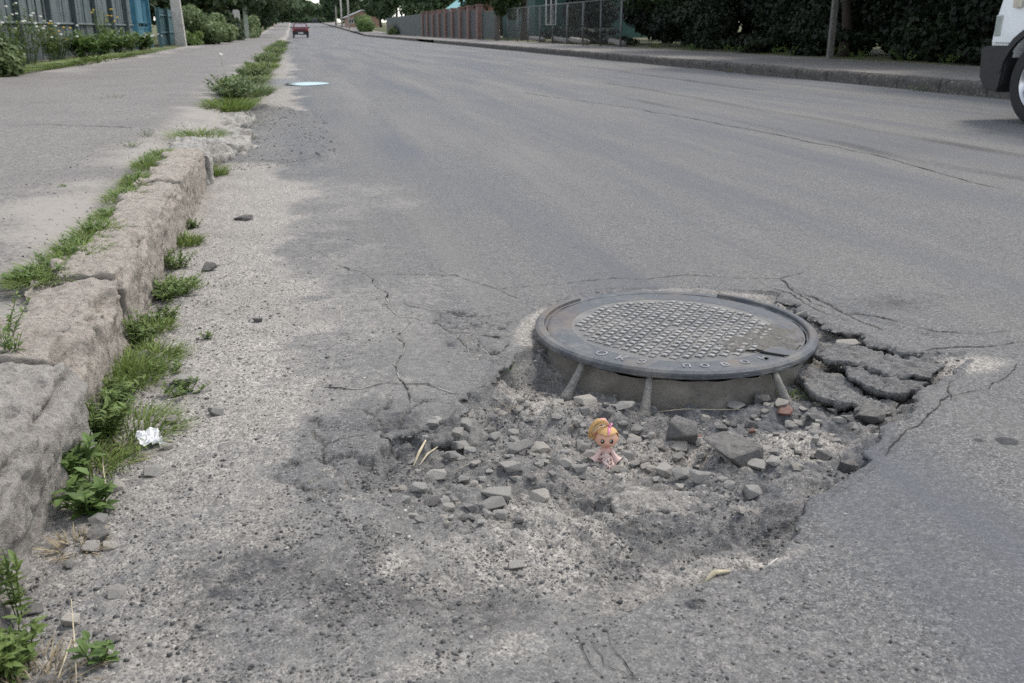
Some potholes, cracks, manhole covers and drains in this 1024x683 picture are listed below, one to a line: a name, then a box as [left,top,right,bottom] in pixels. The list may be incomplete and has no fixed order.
pothole [337,286,974,631]
crack [524,92,1002,189]
crack [574,624,636,680]
crack [267,261,1023,503]
manhole cover [535,291,820,417]
